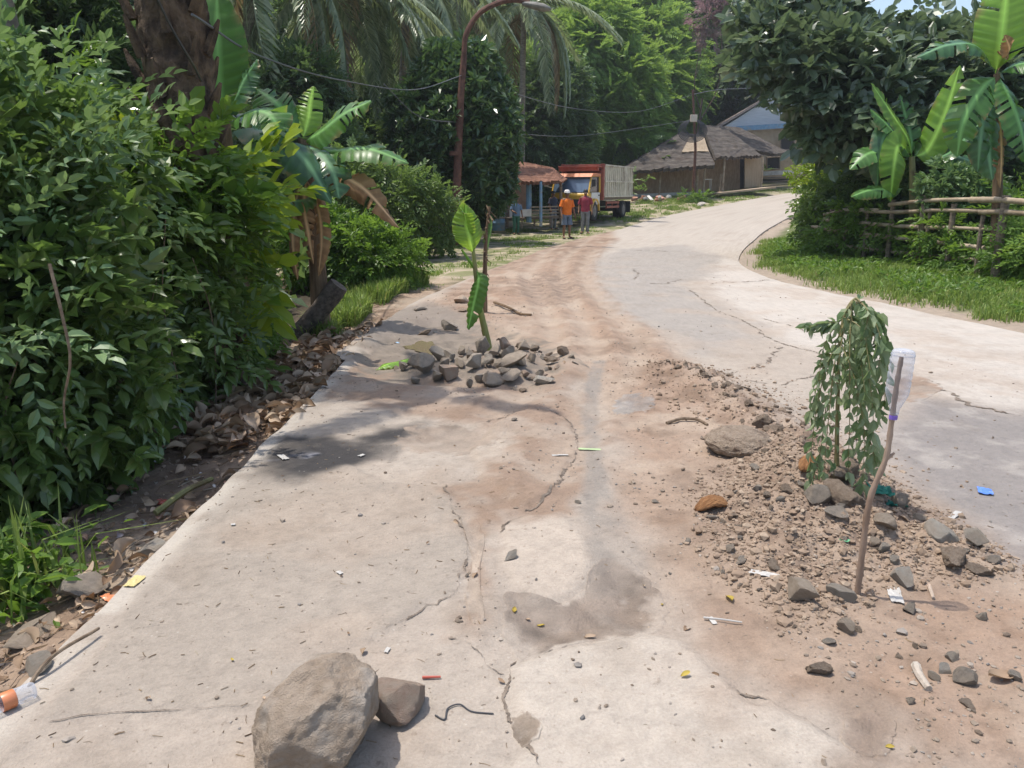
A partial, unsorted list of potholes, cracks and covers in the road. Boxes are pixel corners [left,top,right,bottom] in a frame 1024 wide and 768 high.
crack [932,381,1015,415]
crack [616,262,821,385]
crack [449,635,637,763]
crack [486,410,578,532]
crack [385,485,468,628]
